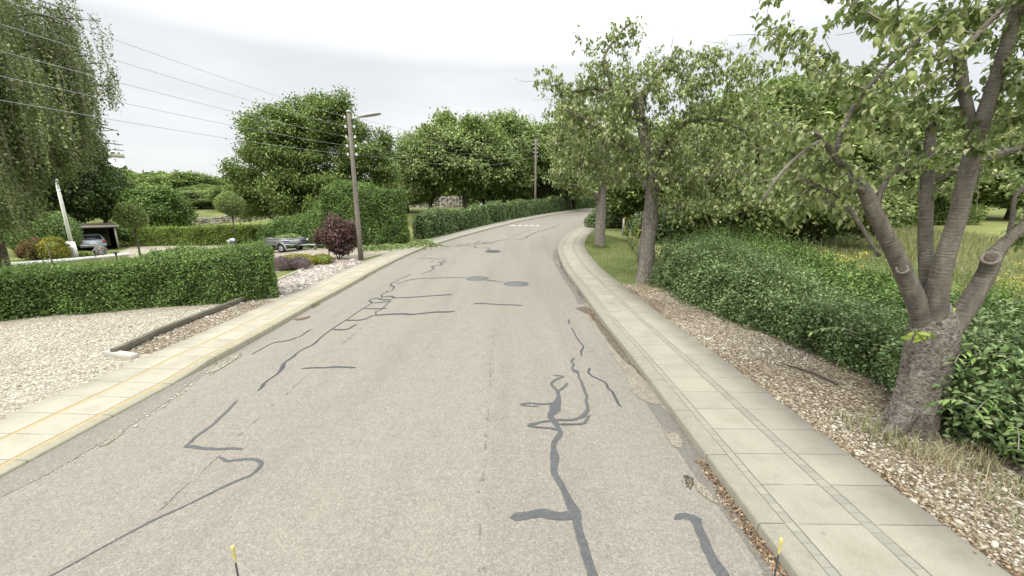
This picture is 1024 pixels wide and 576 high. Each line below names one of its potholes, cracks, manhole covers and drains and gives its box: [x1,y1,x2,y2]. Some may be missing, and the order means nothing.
pothole [681,474,694,490]
